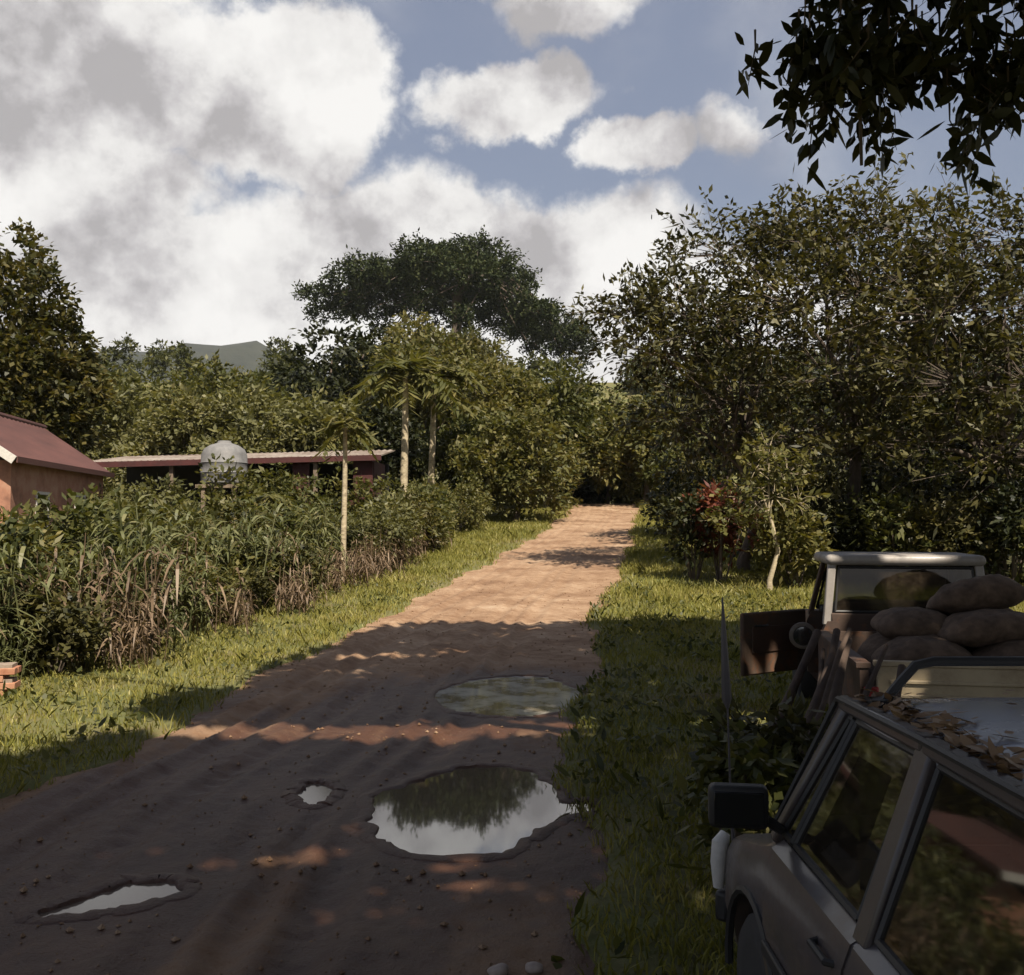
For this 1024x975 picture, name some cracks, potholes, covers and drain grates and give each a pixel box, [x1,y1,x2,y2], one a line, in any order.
pothole [425,673,589,718]
pothole [350,762,601,863]
pothole [14,872,202,925]
pothole [280,778,348,810]
